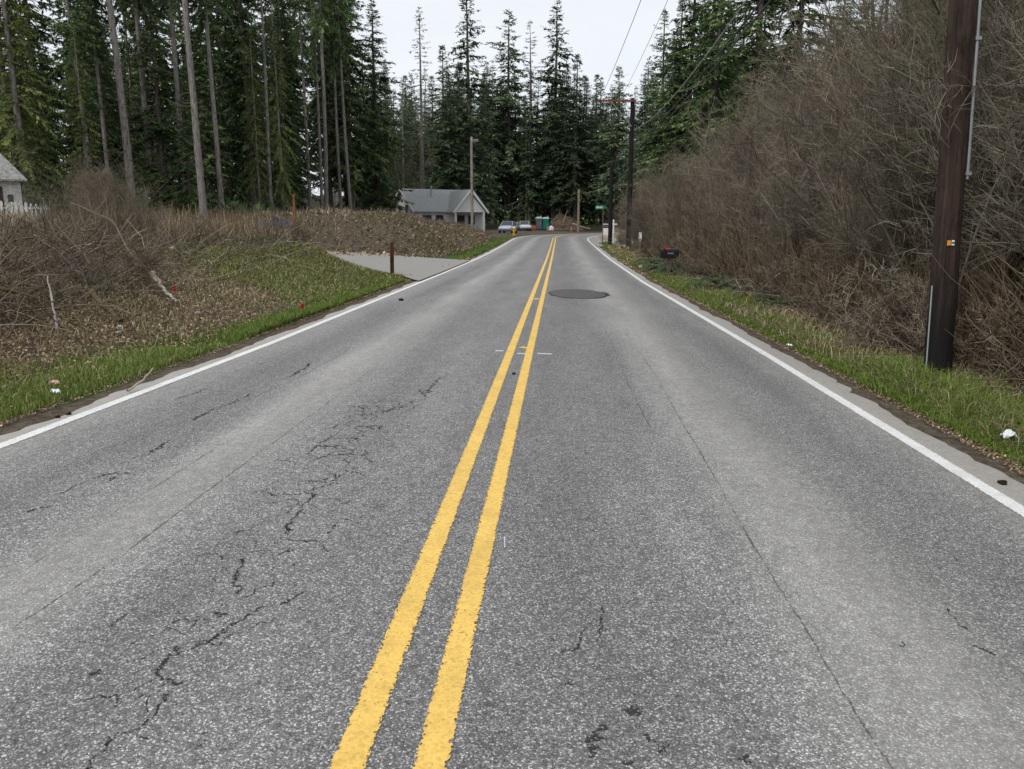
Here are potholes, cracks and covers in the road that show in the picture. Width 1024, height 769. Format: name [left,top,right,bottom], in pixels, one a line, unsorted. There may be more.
crack [561,604,605,654]
manhole cover [548,289,611,299]
crack [27,441,178,512]
crack [85,377,441,769]
